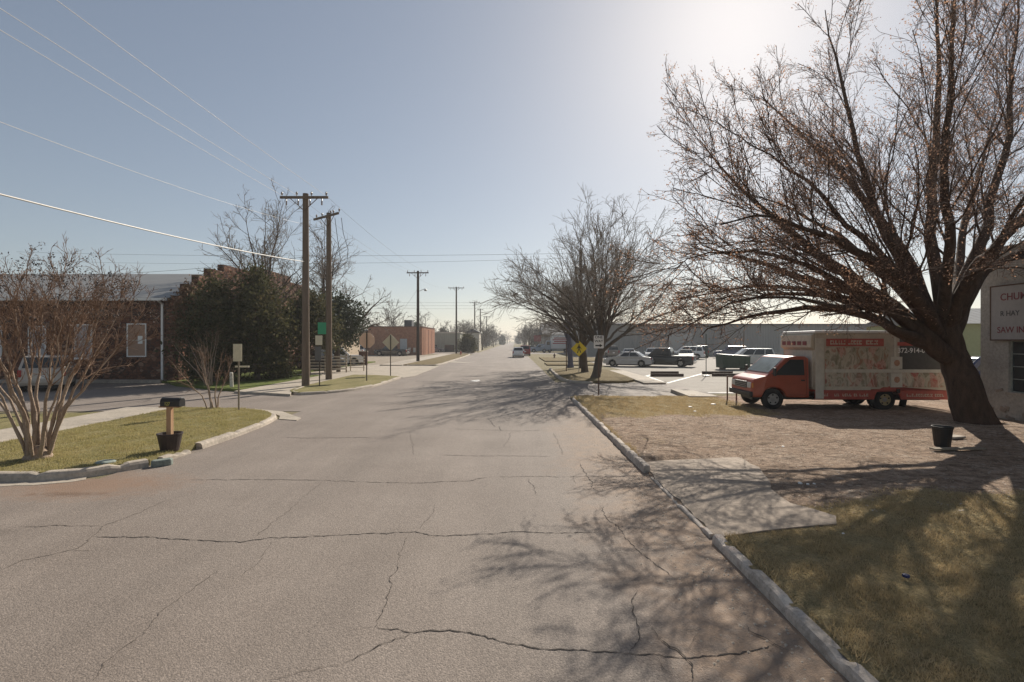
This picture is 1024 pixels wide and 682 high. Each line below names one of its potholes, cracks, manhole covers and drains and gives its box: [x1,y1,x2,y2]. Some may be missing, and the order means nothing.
crack [93,573,214,680]
crack [6,500,165,568]
crack [264,533,790,681]
crack [97,488,586,578]
